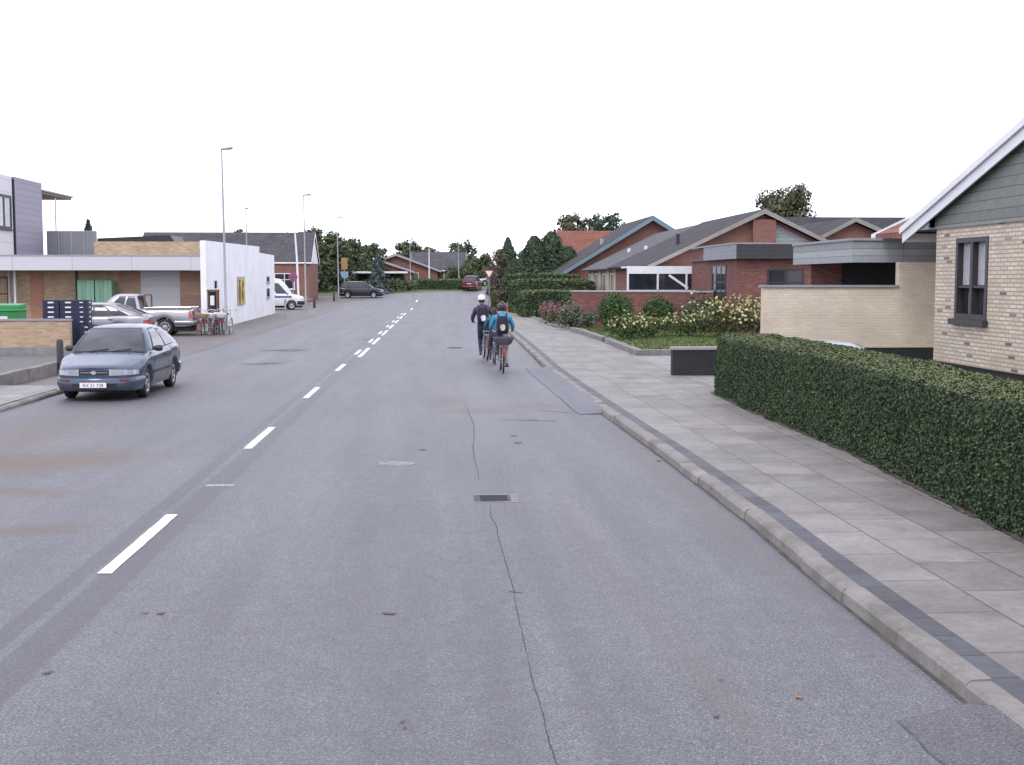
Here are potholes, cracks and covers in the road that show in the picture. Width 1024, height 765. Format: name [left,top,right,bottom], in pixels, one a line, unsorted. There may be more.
crack [490,505,558,765]
